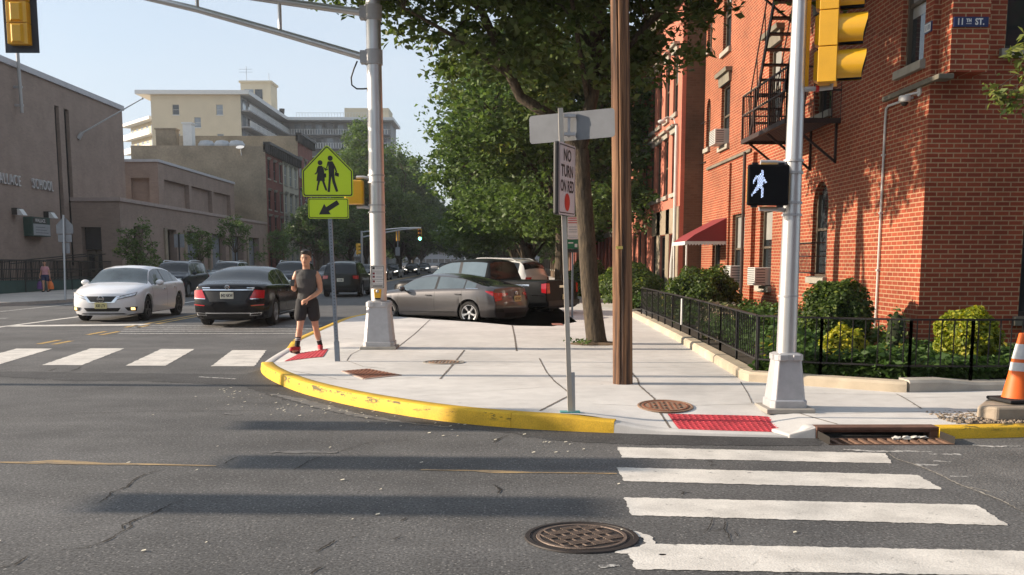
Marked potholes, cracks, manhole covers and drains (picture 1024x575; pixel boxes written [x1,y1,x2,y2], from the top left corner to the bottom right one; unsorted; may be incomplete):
drain grate [812,424,955,445]
manhole cover [524,521,639,554]
manhole cover [637,399,694,413]
utility cover [341,368,402,379]
crack [0,500,184,568]
